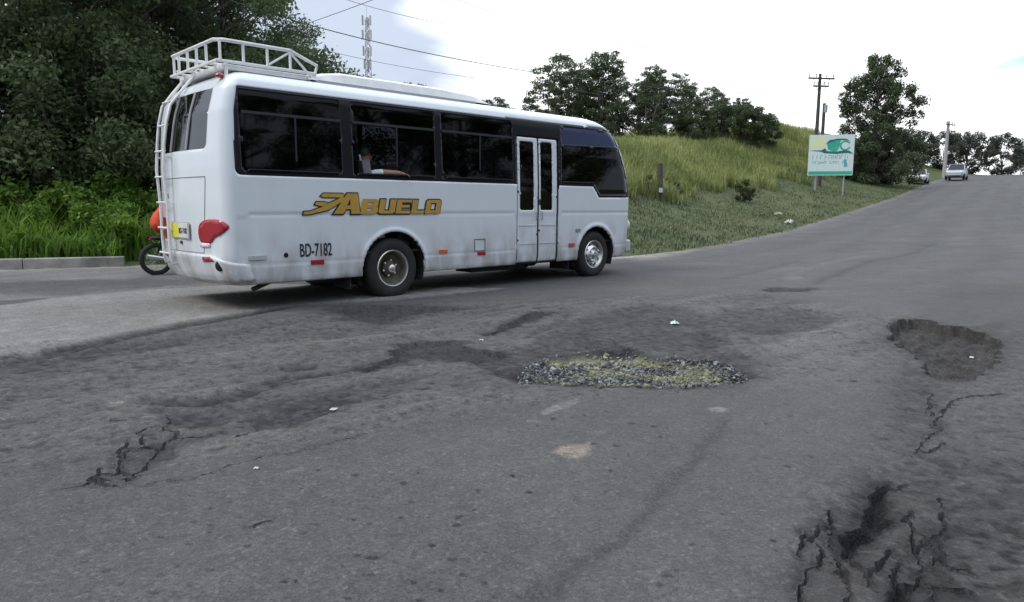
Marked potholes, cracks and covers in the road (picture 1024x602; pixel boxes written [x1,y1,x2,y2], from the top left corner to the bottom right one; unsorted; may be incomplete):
pothole [480,311,558,336]
crack [795,484,978,602]
crack [913,393,1005,454]
pothole [359,340,506,373]
pothole [519,348,743,388]
pothole [885,319,1007,382]
crack [60,417,366,491]
